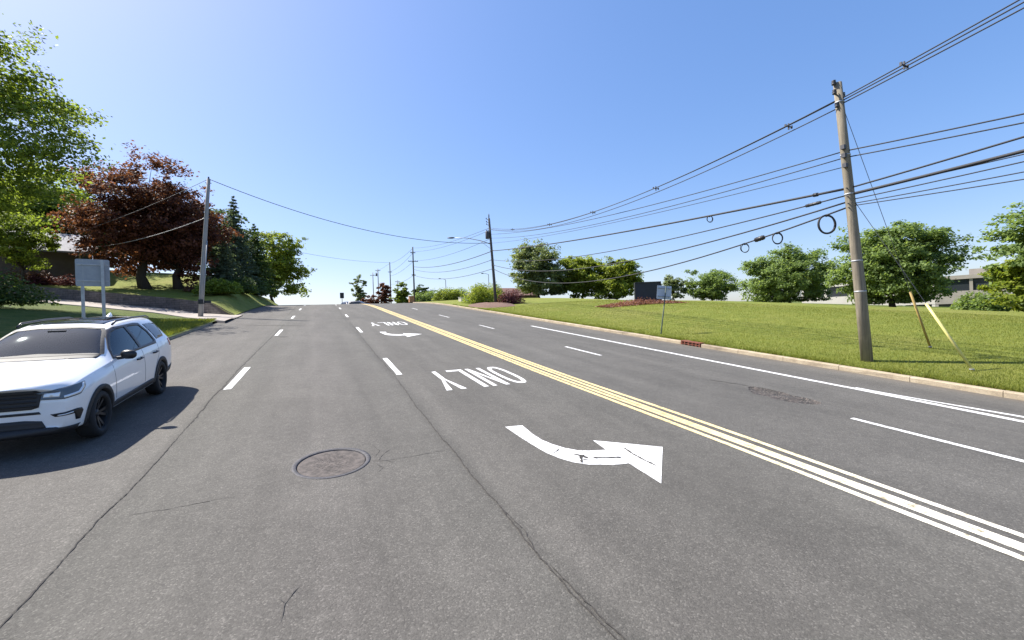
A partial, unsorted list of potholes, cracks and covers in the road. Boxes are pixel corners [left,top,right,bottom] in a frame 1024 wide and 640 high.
crack [0,329,279,627]
crack [350,322,627,640]
manhole cover [291,448,371,479]
